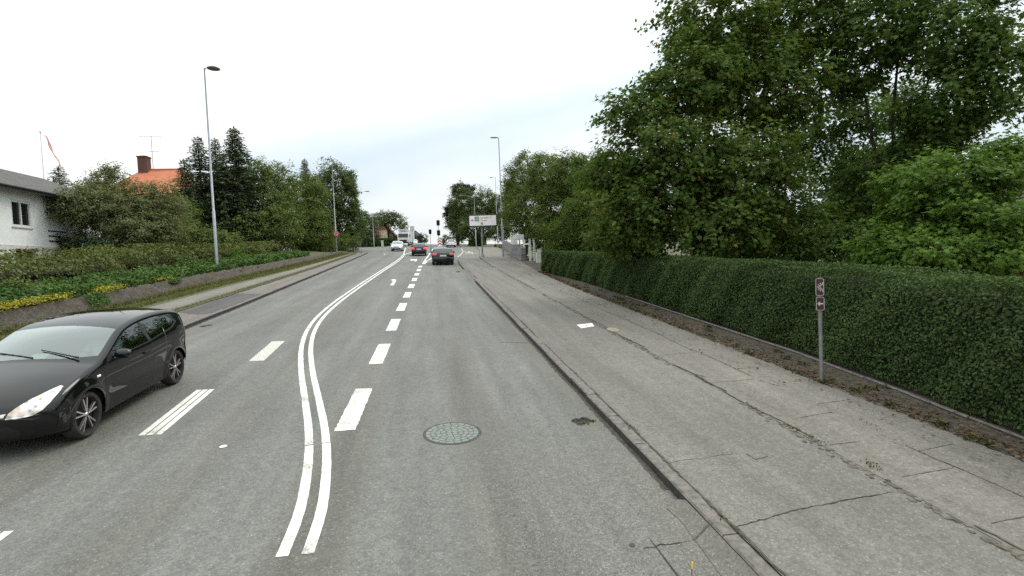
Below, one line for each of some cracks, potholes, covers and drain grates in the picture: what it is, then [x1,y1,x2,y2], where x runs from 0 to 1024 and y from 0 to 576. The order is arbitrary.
crack [736,491,895,527]
crack [645,524,709,576]
manhole cover [423,422,481,445]
pothole [571,417,596,426]
